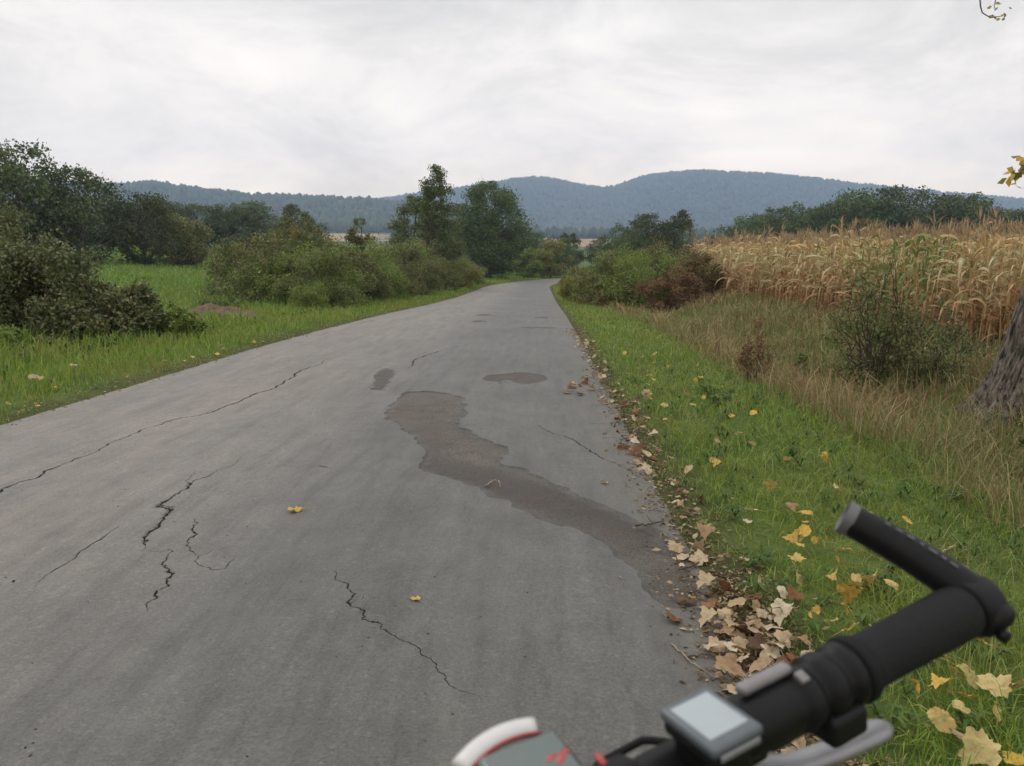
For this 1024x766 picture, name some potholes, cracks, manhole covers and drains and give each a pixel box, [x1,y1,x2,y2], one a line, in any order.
crack [0,358,333,493]
crack [334,571,482,700]
crack [539,423,636,473]
crack [141,457,242,611]
crack [36,527,118,585]
